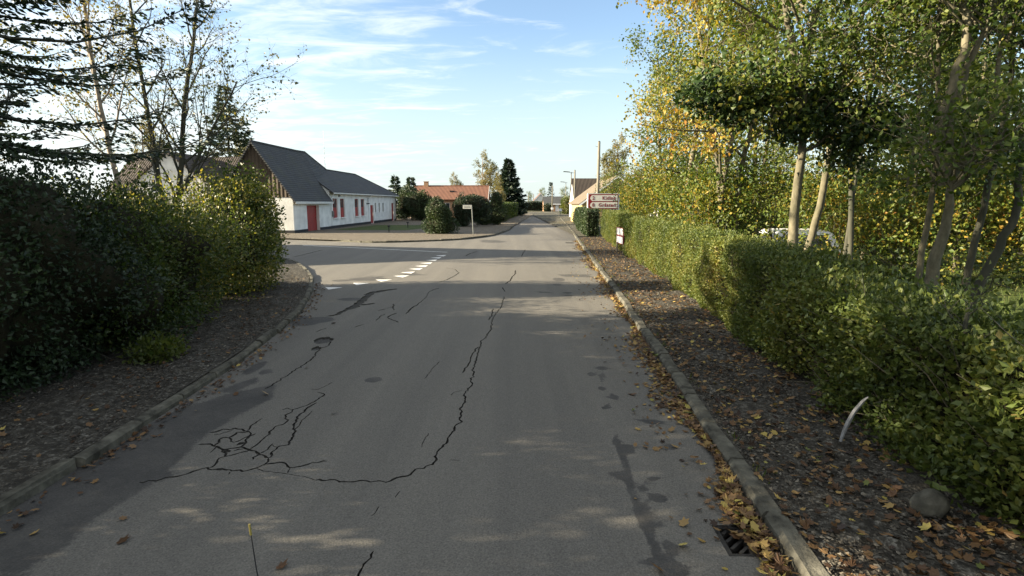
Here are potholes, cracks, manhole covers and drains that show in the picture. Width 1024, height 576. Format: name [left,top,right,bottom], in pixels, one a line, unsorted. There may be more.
drain grate [712,525,781,557]
crack [357,551,374,576]
crack [139,250,525,515]
